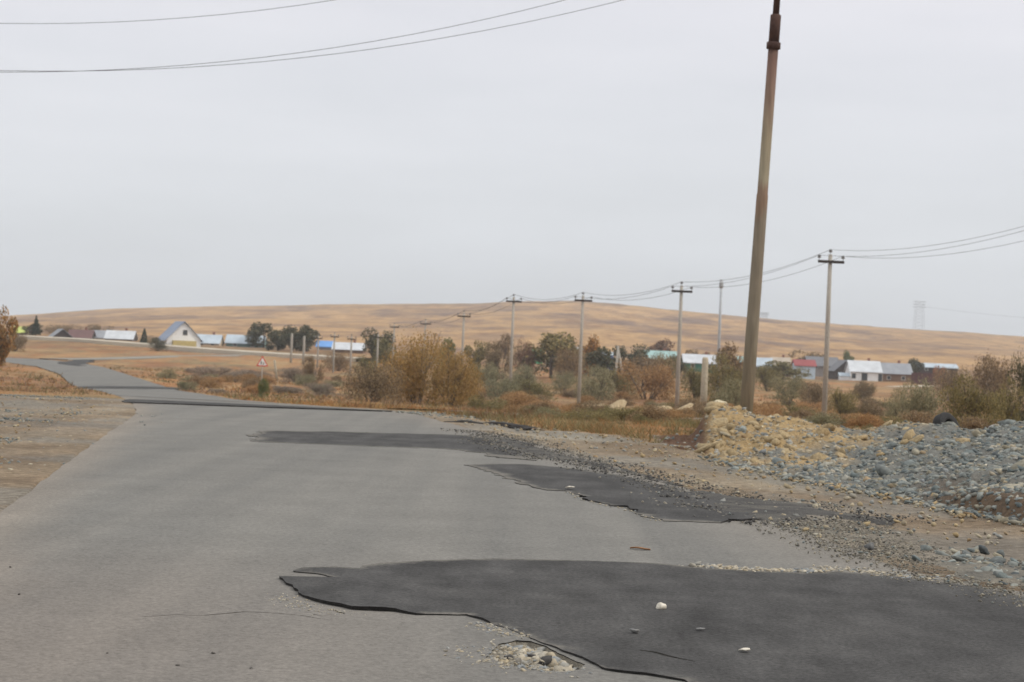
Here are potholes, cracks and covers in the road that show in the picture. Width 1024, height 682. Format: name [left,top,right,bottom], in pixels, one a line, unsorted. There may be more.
pothole [486,641,584,672]
